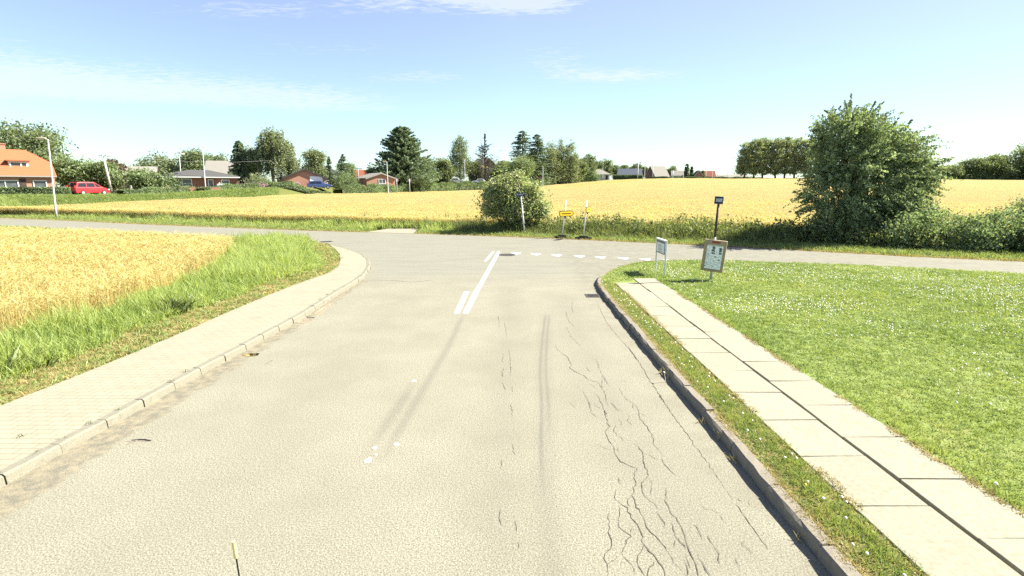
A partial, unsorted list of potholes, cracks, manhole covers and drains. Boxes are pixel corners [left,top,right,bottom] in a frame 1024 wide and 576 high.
crack [556,348,752,576]
